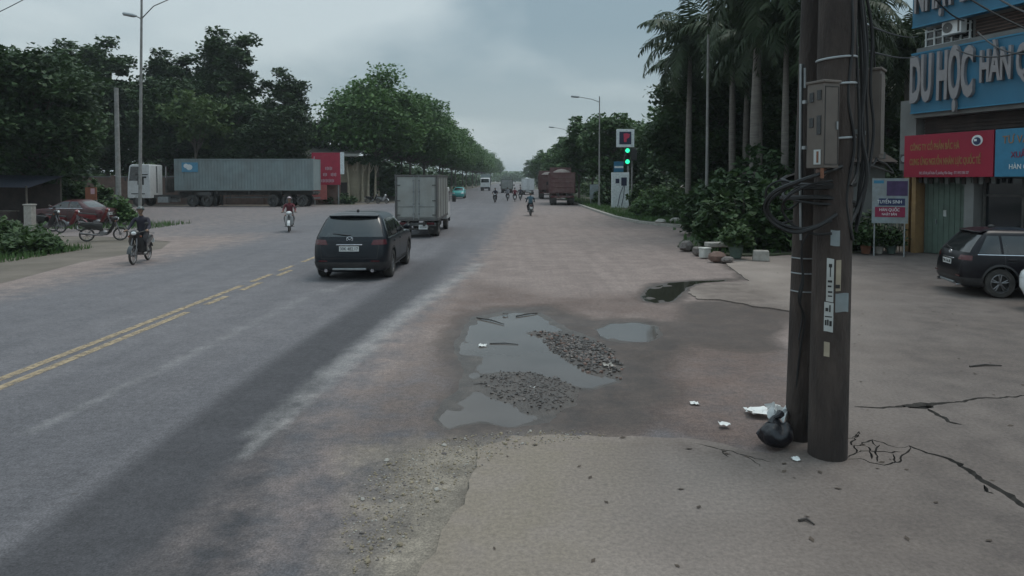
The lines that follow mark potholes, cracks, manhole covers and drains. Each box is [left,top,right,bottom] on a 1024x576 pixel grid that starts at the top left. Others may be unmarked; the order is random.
pothole [594,321,663,343]
pothole [433,310,626,430]
crack [696,443,769,465]
pothole [640,280,727,303]
crack [848,395,1024,508]
